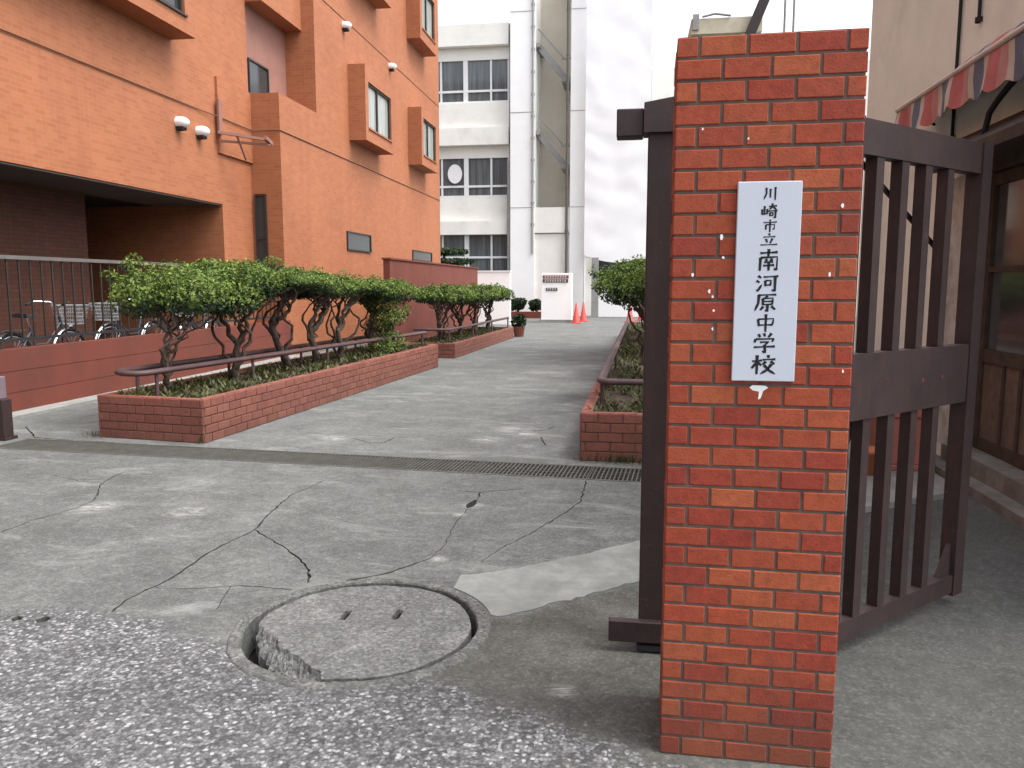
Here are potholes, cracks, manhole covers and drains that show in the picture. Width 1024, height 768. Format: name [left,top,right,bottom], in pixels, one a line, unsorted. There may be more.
crack [2,471,125,532]
drain grate [262,451,383,468]
drain grate [75,442,195,457]
drain grate [587,466,641,483]
crack [347,489,519,581]
crack [481,481,587,562]
manhole cover [226,578,491,691]
drain grate [167,447,287,462]
drain grate [363,456,485,474]
drain grate [472,461,593,480]
crack [112,480,325,611]
drain grate [0,438,110,453]
